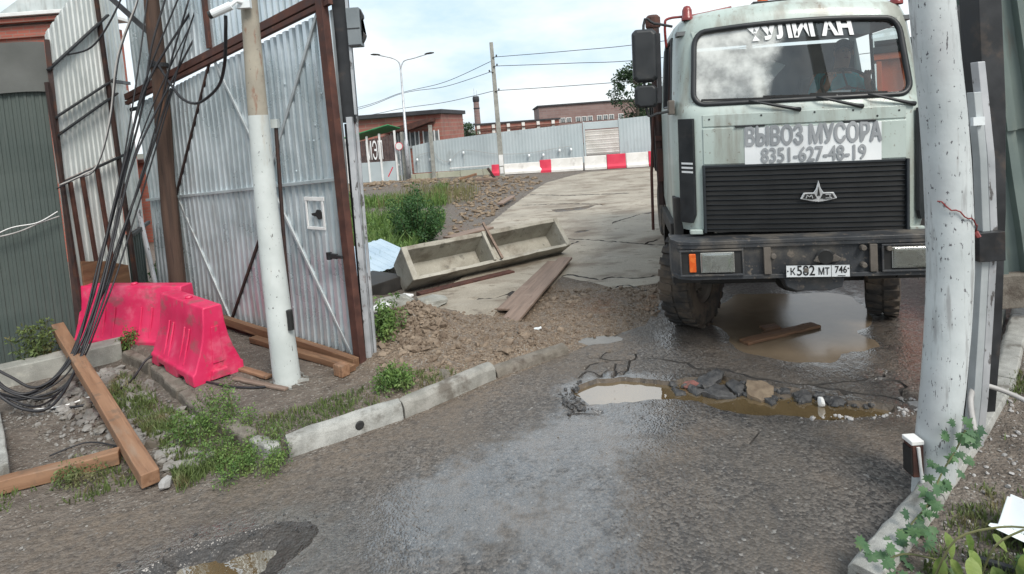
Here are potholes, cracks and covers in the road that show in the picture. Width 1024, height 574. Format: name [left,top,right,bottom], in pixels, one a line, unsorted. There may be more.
crack [568,214,665,246]
pothole [134,521,319,574]
crack [563,274,654,291]
crack [578,352,908,403]
pothole [571,376,895,414]
